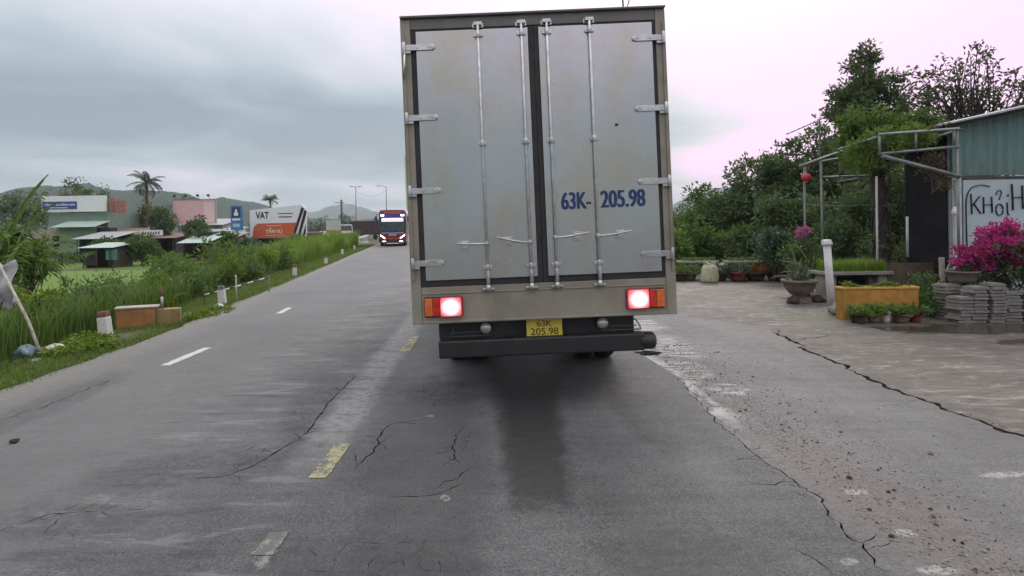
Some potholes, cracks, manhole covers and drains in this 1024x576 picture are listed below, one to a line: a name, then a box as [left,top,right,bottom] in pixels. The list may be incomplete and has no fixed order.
crack [772,330,1024,437]
crack [401,427,471,497]
crack [157,375,355,480]
crack [309,542,458,576]
crack [677,379,890,572]
crack [1,505,142,539]
crack [355,382,465,466]
